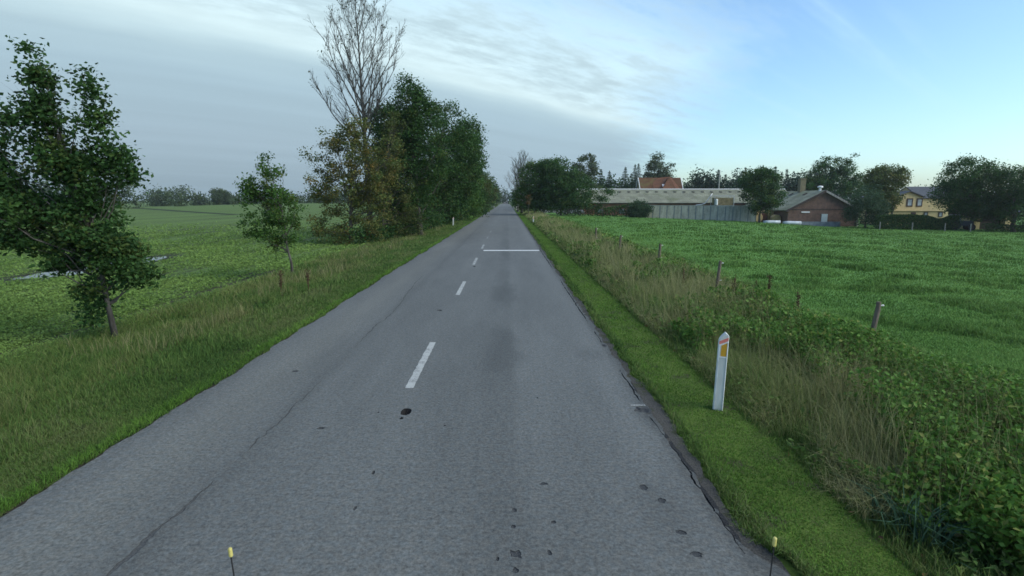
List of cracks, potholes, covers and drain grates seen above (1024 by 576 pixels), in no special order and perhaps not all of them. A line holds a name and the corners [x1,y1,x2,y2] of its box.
crack [106,481,213,576]
